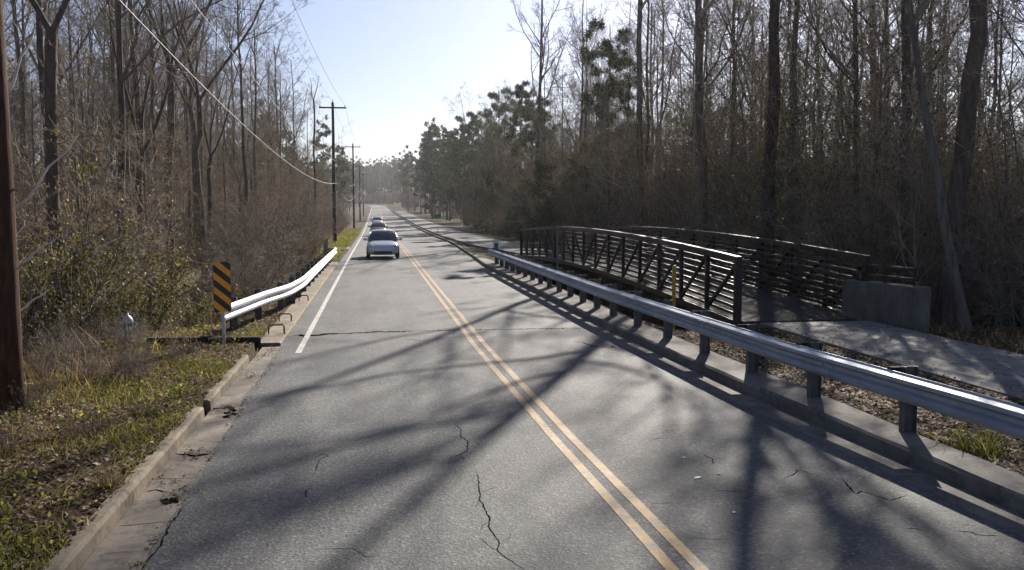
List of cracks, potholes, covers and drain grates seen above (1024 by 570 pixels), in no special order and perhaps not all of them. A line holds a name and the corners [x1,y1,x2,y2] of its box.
crack [443,424,525,570]
crack [838,479,904,501]
crack [123,489,184,570]
crack [292,328,614,348]
